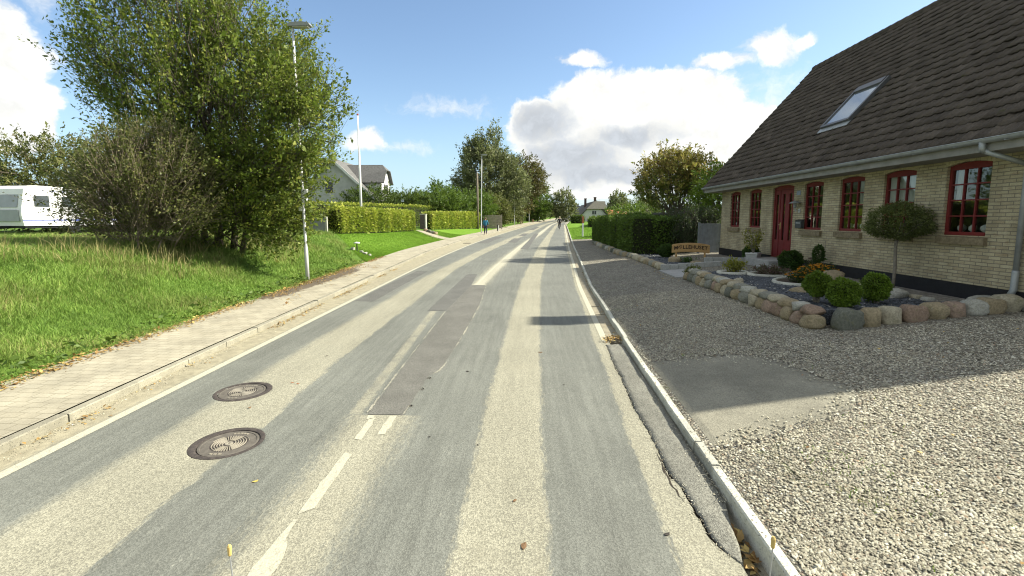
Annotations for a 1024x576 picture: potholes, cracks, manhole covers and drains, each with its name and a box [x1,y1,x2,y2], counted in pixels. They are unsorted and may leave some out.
manhole cover [187,427,265,460]
manhole cover [213,382,272,402]
crack [607,349,737,561]
